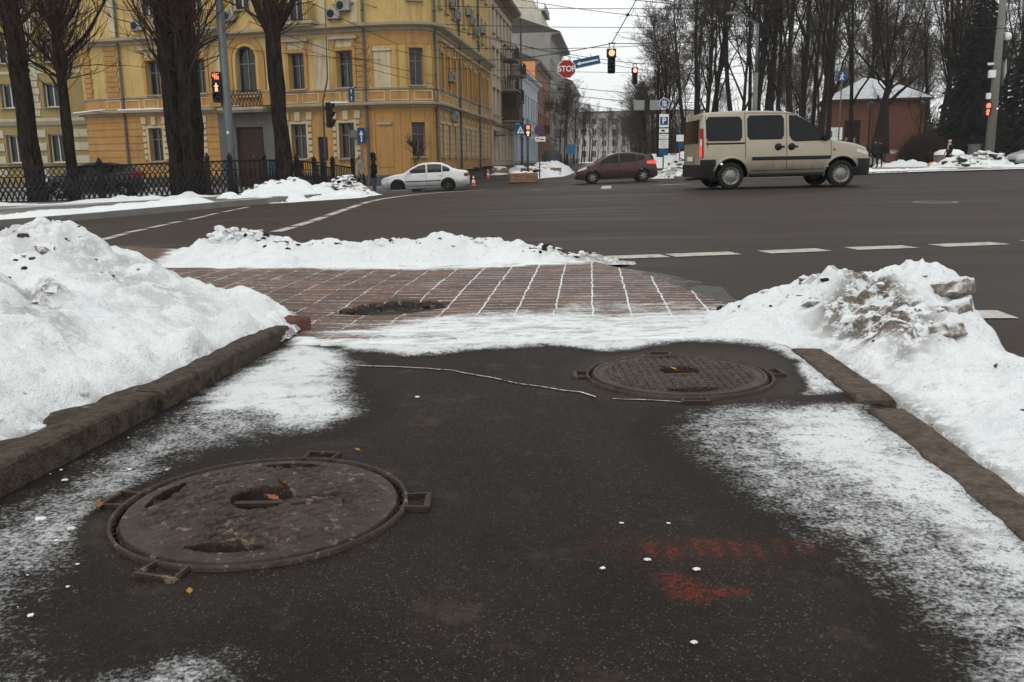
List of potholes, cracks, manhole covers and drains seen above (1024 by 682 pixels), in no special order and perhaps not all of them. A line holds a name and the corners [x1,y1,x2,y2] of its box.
crack [346,364,680,402]
manhole cover [97,450,432,584]
pothole [338,301,450,316]
manhole cover [573,351,787,404]
